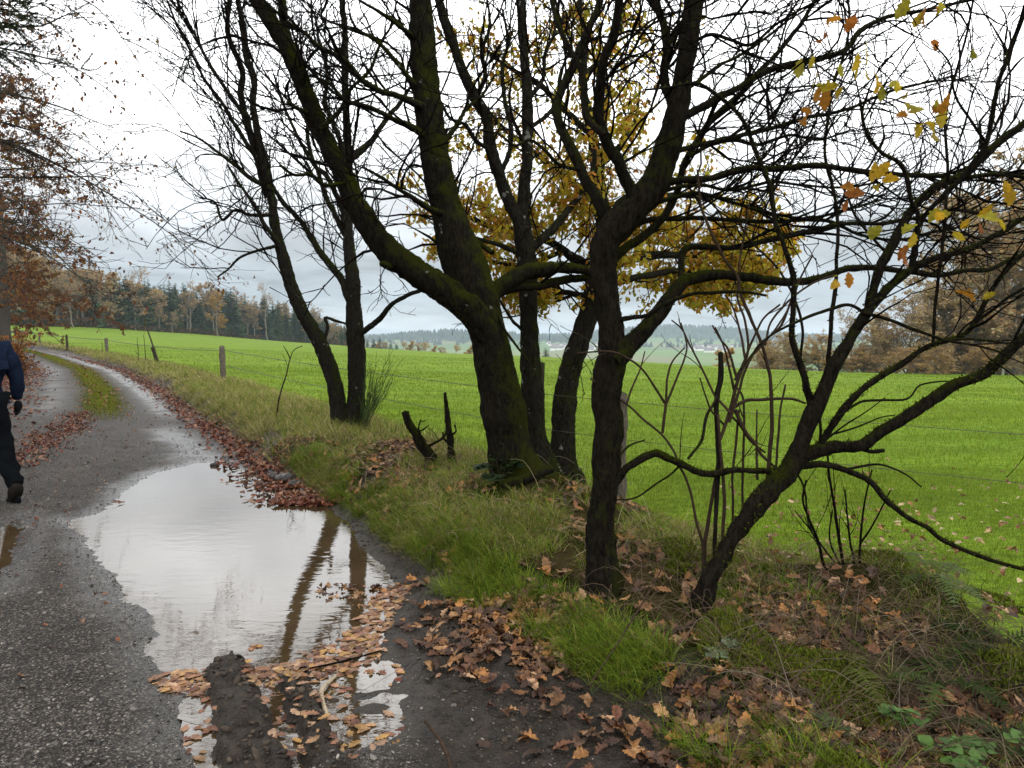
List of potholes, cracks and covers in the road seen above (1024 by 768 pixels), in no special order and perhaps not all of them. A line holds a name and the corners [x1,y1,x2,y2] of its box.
pothole [68,460,408,724]
